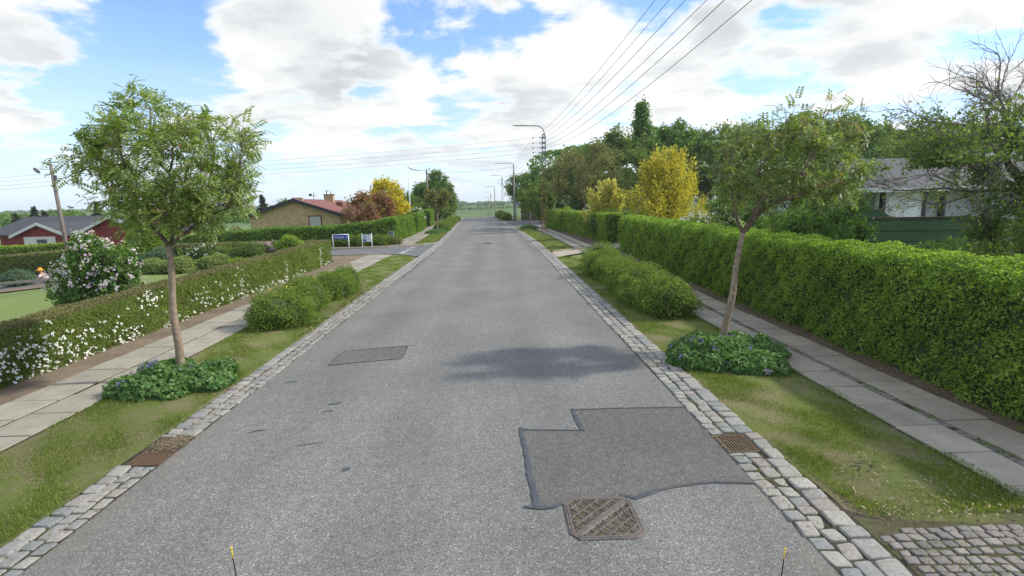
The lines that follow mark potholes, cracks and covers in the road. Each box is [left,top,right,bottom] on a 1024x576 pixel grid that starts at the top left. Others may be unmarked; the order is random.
drain grate [126,449,180,467]
drain grate [713,434,761,454]
